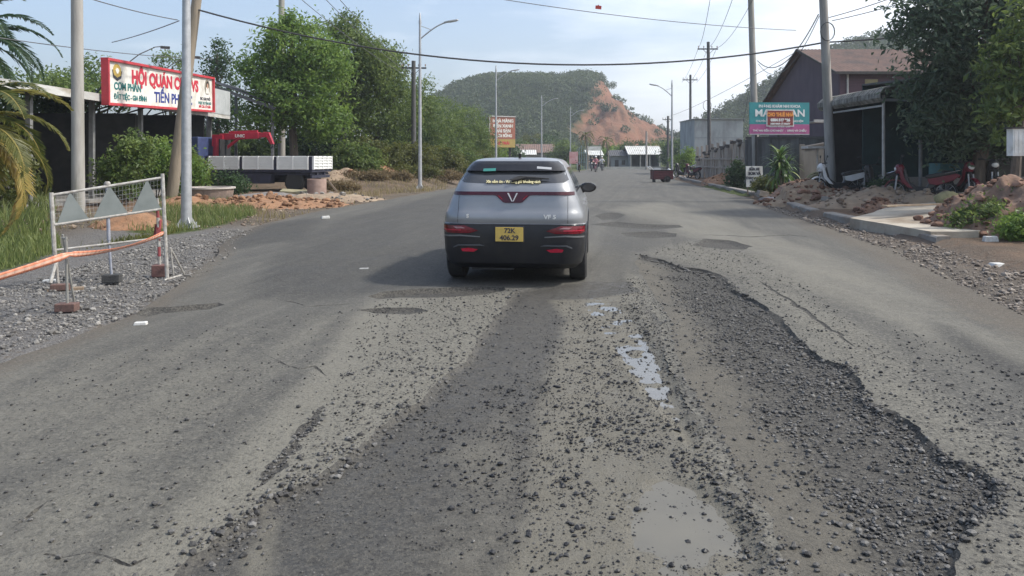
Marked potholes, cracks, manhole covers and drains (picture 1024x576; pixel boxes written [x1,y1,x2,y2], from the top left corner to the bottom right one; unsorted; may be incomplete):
crack [760,281,854,346]
crack [43,552,147,567]
pothole [174,282,788,576]
crack [270,357,327,376]
pothole [634,255,1000,576]
